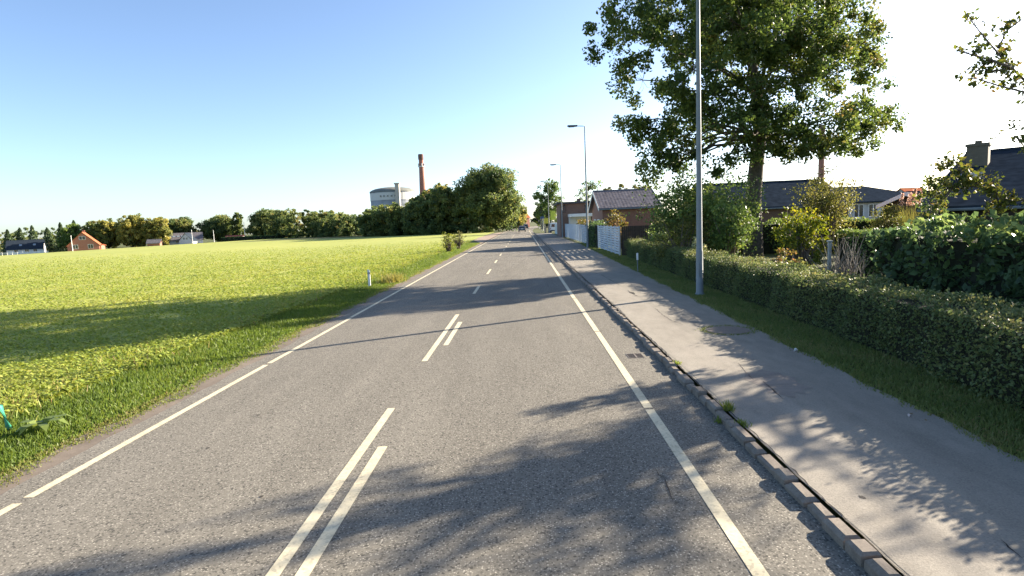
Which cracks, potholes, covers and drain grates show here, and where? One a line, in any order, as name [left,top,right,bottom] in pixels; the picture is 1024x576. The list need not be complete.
manhole cover [695,324,758,336]
